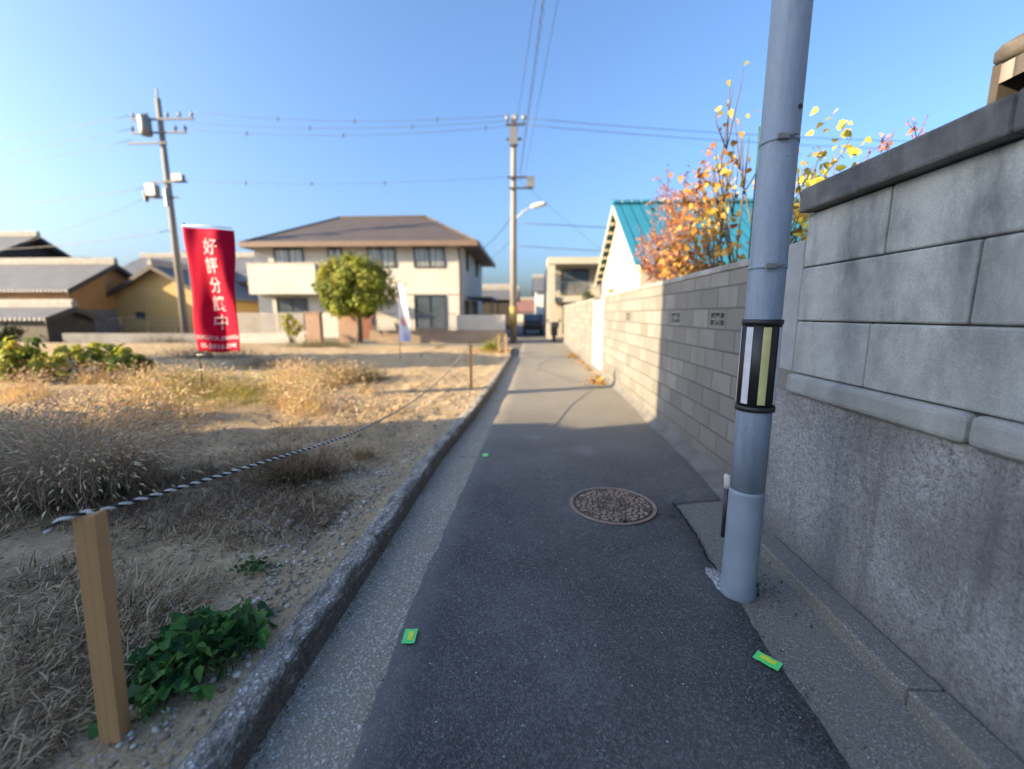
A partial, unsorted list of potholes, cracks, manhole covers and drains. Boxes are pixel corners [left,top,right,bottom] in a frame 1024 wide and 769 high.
manhole cover [569,487,658,526]
